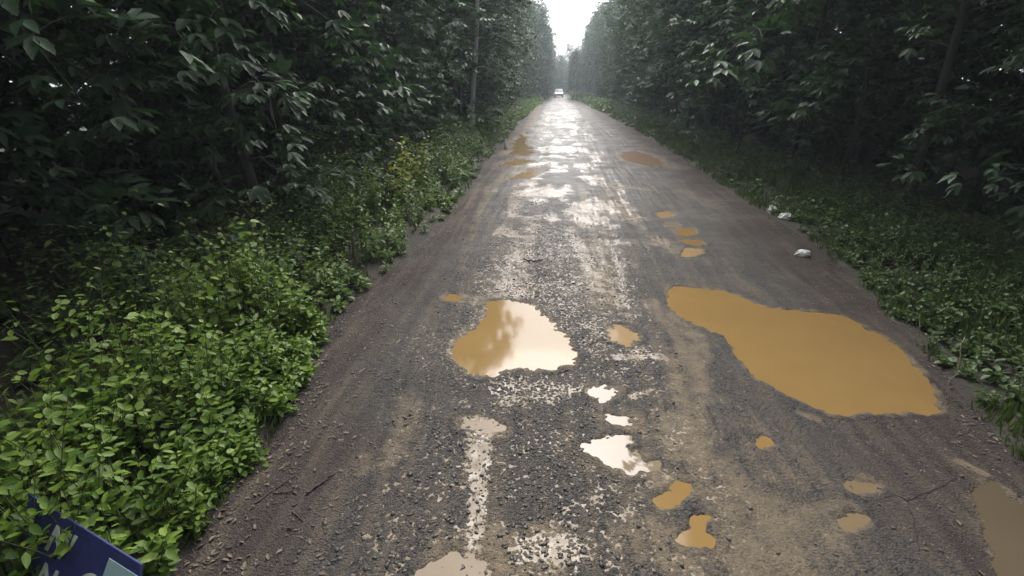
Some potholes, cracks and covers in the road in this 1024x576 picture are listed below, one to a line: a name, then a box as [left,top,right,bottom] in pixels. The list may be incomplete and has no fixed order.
pothole [442,296,587,382]
pothole [642,473,705,518]
pothole [599,321,649,349]
pothole [660,284,951,422]
pothole [574,380,630,409]
pothole [746,429,783,454]
pothole [618,151,666,167]
pothole [446,411,516,443]
pothole [399,538,511,576]
pothole [503,132,540,156]
pothole [571,428,672,484]
pothole [671,226,702,237]
